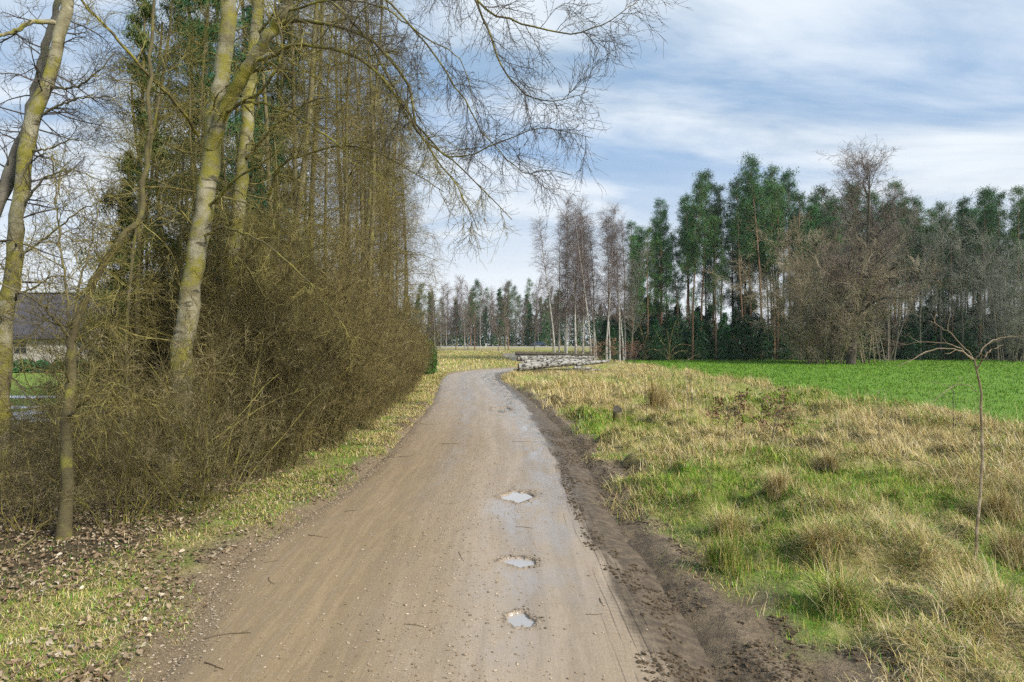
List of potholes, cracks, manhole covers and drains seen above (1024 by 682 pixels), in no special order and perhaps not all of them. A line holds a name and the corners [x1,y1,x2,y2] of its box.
pothole [494,555,542,570]
pothole [492,488,539,505]
pothole [501,608,542,631]
